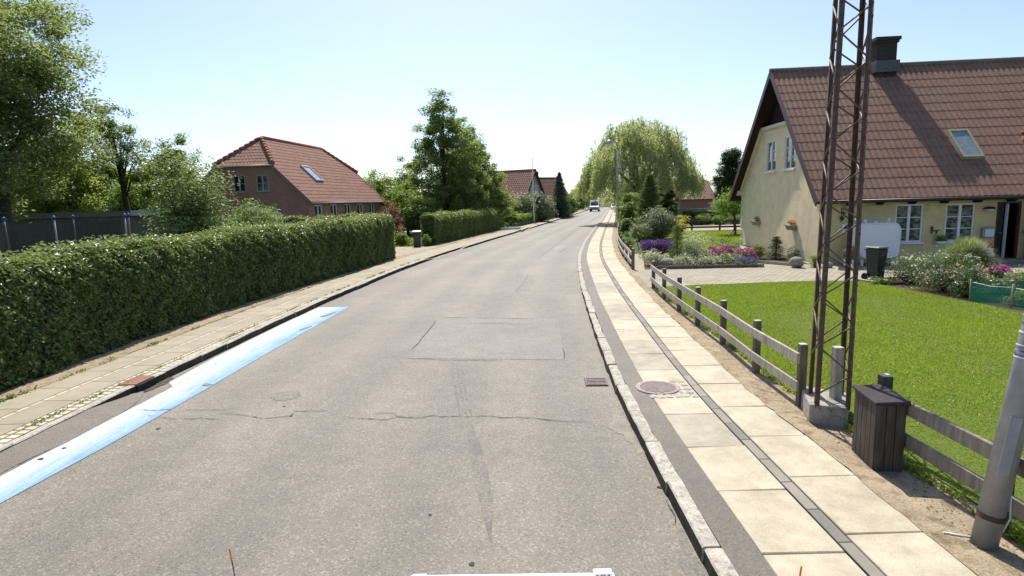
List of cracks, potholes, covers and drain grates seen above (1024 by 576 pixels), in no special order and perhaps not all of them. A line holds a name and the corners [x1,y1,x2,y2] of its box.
crack [351,413,588,422]
drain grate [584,378,609,386]
crack [142,409,294,419]
manhole cover [635,380,680,395]
